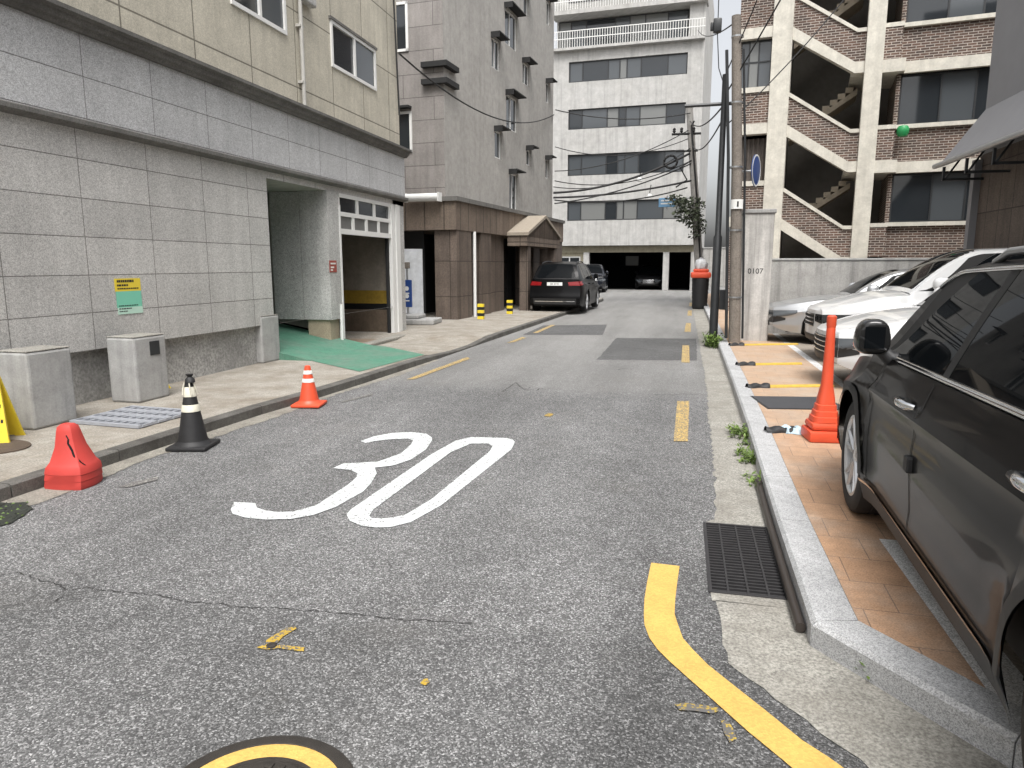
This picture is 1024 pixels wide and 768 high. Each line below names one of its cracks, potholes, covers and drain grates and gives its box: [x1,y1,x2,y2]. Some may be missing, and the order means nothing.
crack [0,572,475,624]
drain grate [703,522,787,600]
manhole cover [184,735,354,768]
drain grate [69,405,181,429]
